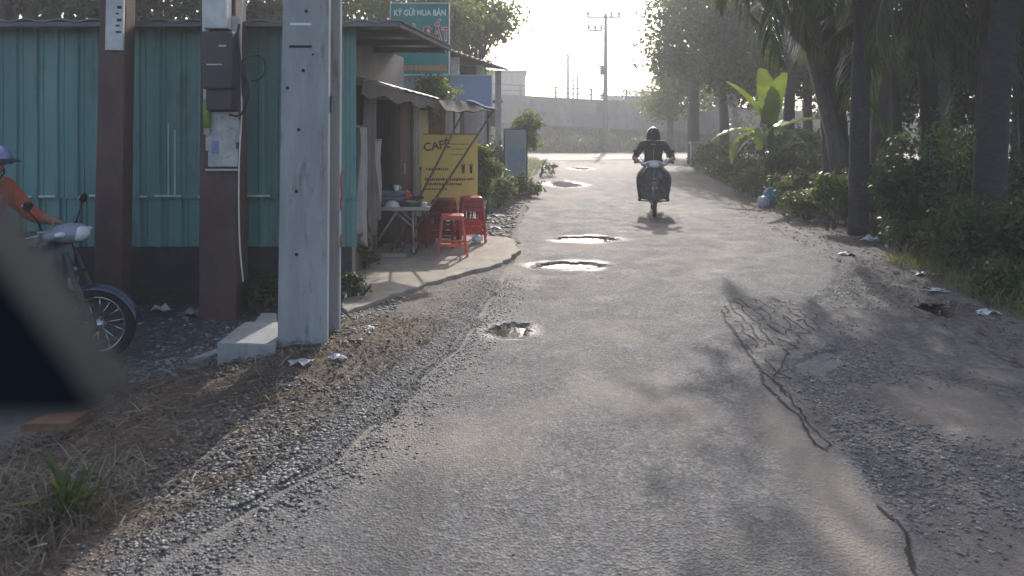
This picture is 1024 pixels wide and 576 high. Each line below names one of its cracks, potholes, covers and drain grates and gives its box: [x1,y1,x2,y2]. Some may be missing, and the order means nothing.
crack [721,298,832,451]
pothole [549,180,584,188]
pothole [530,261,614,270]
crack [876,504,918,576]
pothole [482,321,533,339]
